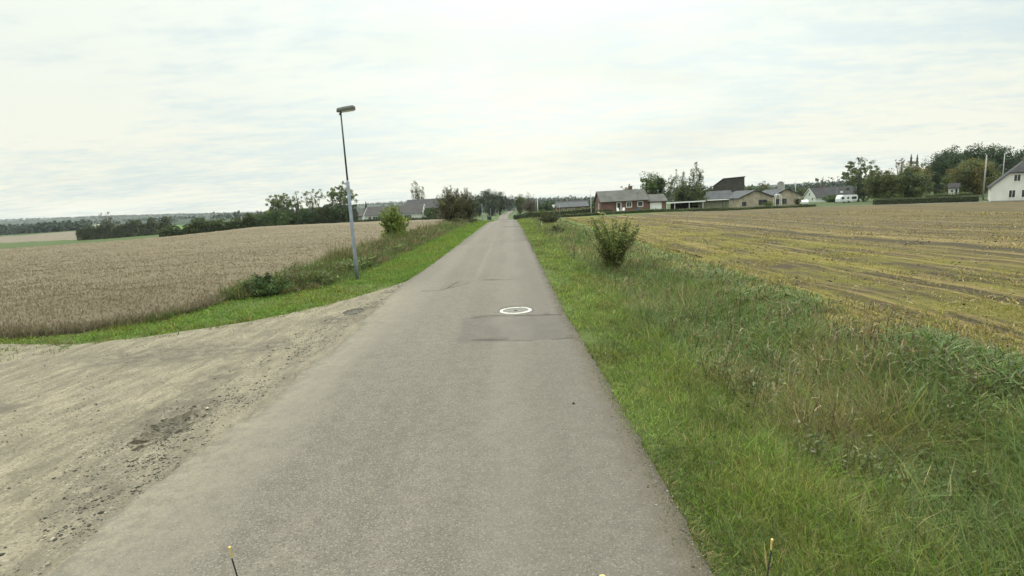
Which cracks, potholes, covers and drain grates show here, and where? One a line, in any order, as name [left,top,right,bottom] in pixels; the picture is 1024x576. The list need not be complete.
pothole [127,408,213,452]
